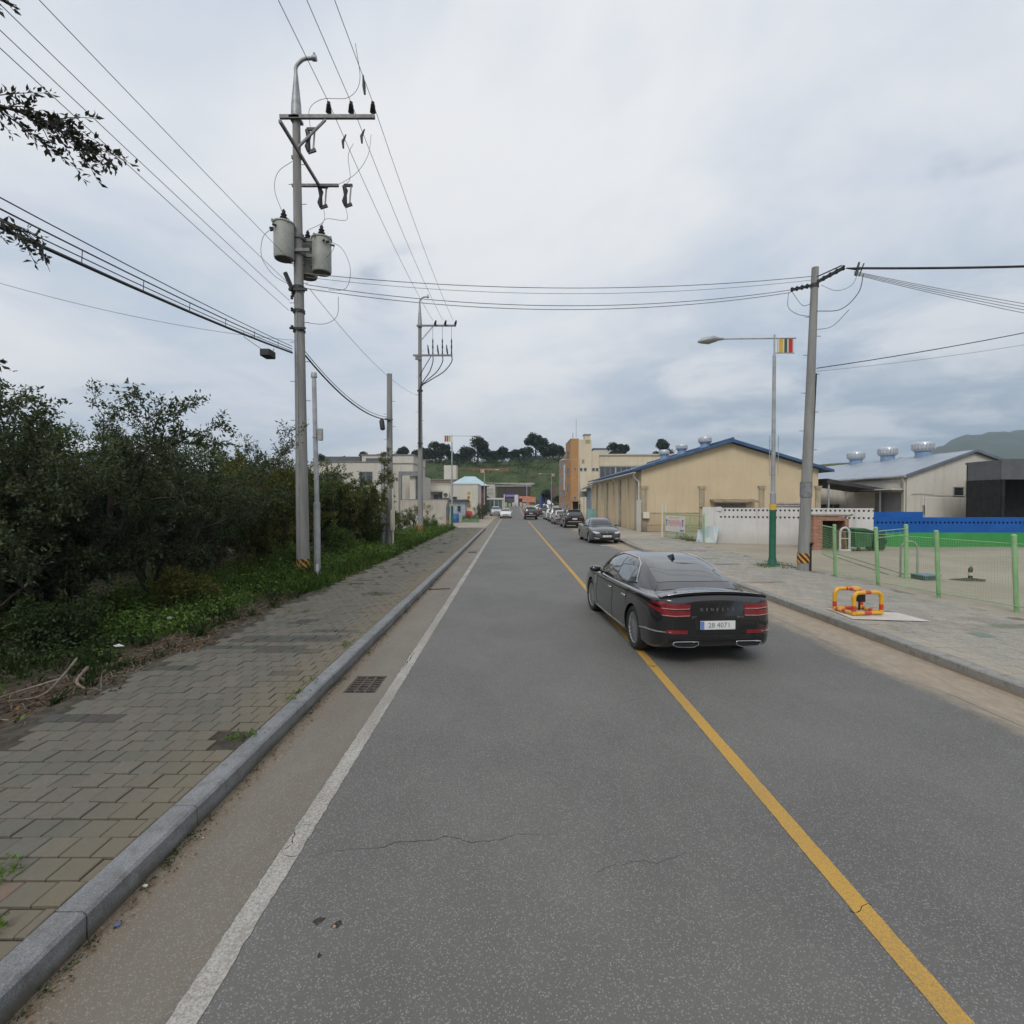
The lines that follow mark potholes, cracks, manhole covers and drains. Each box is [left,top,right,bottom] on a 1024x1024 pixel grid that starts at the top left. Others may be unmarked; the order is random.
drain grate [343,676,387,693]
crack [314,834,556,856]
